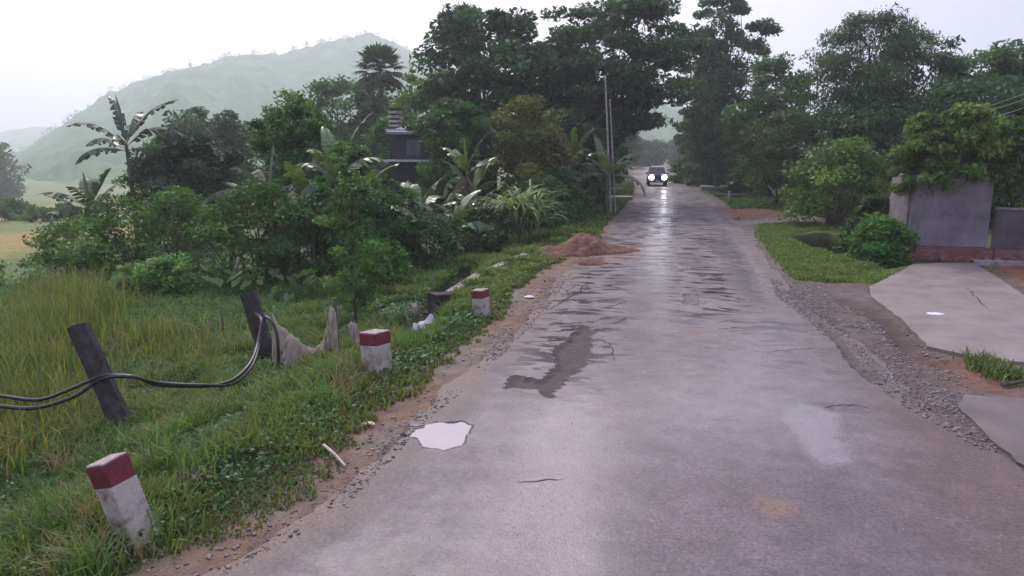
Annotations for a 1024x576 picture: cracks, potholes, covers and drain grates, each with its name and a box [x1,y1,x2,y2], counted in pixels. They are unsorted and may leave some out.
pothole [409,420,474,451]
crack [550,282,591,310]
